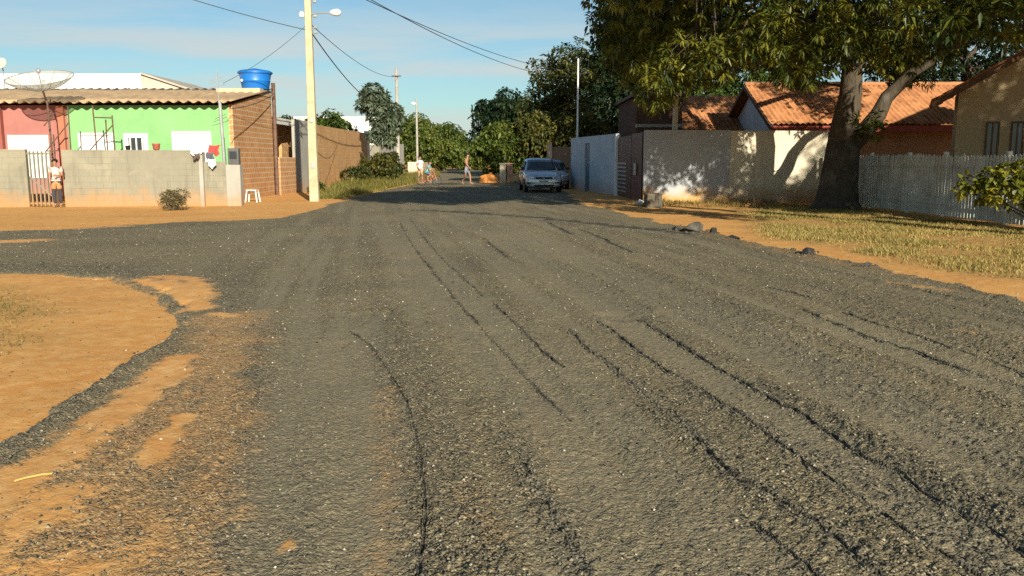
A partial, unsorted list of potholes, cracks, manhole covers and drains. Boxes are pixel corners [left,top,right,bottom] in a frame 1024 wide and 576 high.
crack [593,287,1024,576]
crack [349,209,698,576]
